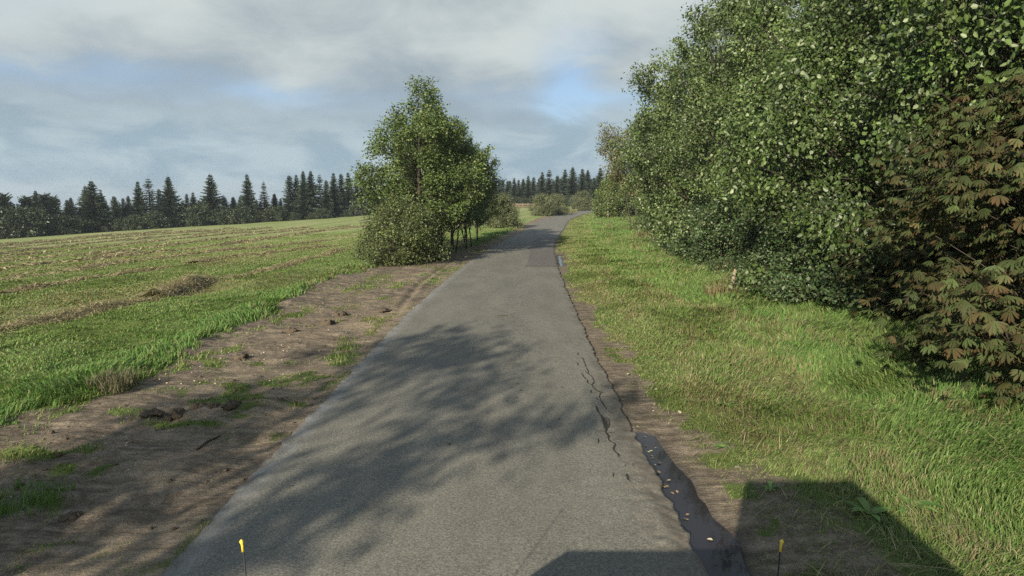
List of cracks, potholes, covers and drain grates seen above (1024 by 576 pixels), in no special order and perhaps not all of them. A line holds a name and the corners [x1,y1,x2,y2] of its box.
crack [577,353,643,483]
